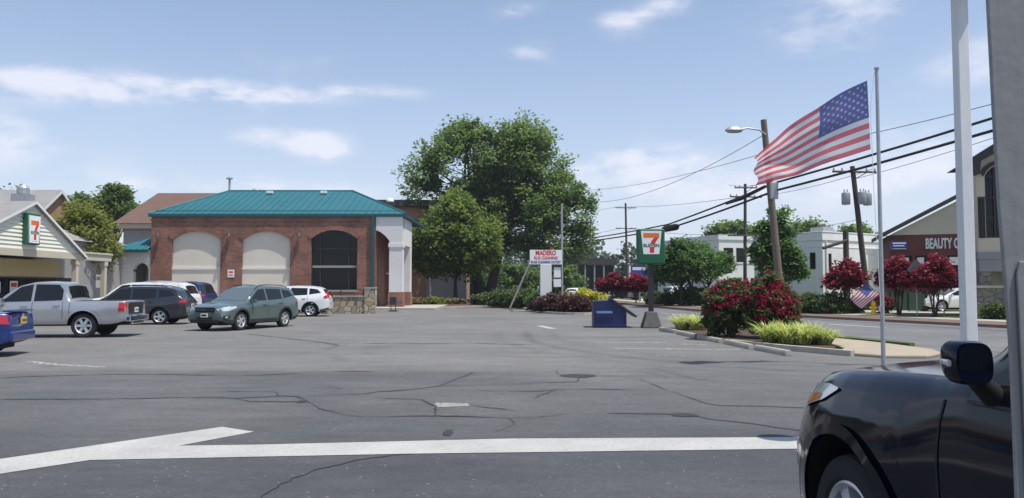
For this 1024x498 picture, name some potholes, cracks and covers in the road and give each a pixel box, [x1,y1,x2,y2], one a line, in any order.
crack [4,371,623,436]
crack [261,454,400,498]
crack [252,334,527,350]
